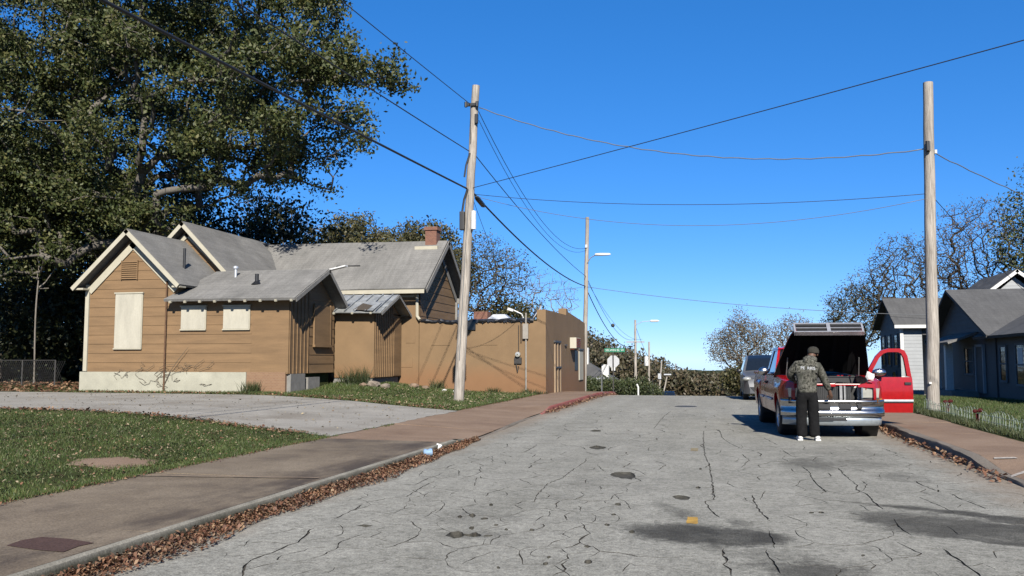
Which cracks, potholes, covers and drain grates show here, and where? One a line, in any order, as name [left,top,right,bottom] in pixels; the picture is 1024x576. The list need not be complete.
crack [215,409,696,576]
pothole [445,531,481,539]
crack [700,408,1024,576]
pothole [610,472,635,480]
